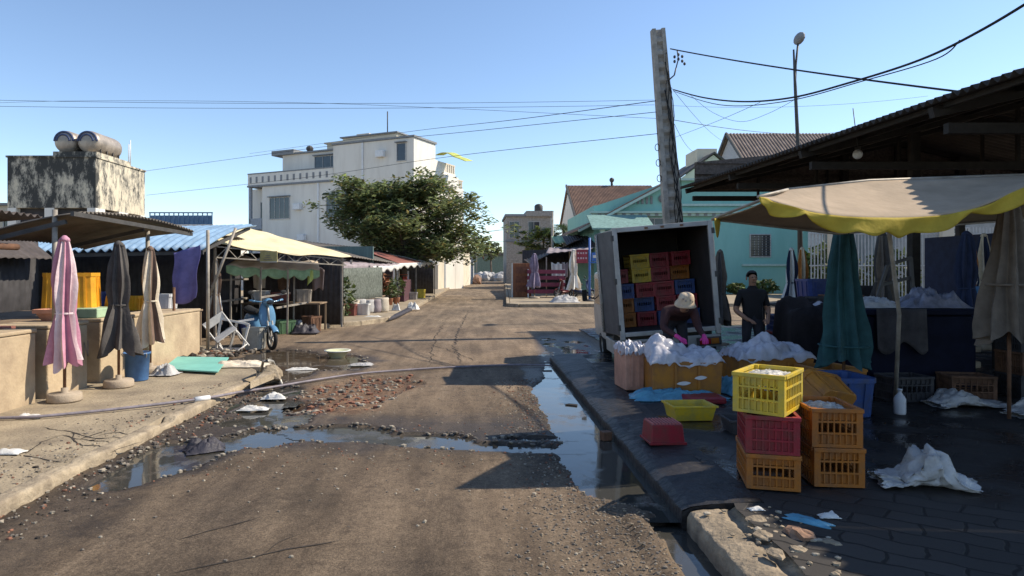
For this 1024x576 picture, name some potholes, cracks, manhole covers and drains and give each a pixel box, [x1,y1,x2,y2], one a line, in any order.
crack [429,311,473,366]
pothole [199,385,316,429]
pothole [283,374,426,416]
crack [24,427,145,462]
pothole [77,426,300,492]
pothole [276,422,595,454]
